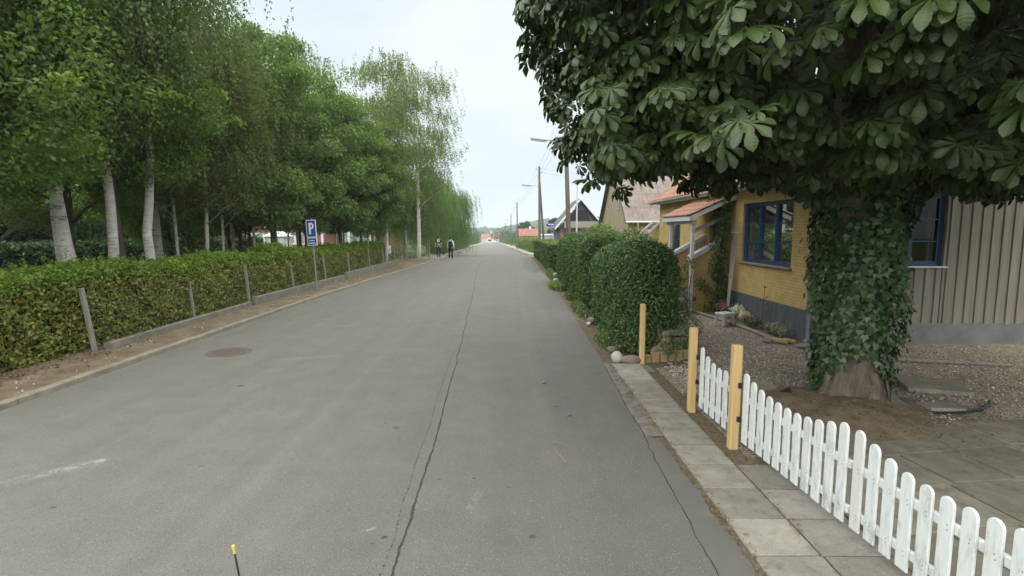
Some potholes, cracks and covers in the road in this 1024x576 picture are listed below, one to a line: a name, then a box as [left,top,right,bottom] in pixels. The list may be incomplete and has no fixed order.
manhole cover [205,347,252,357]
crack [605,366,719,576]
crack [379,265,479,576]
